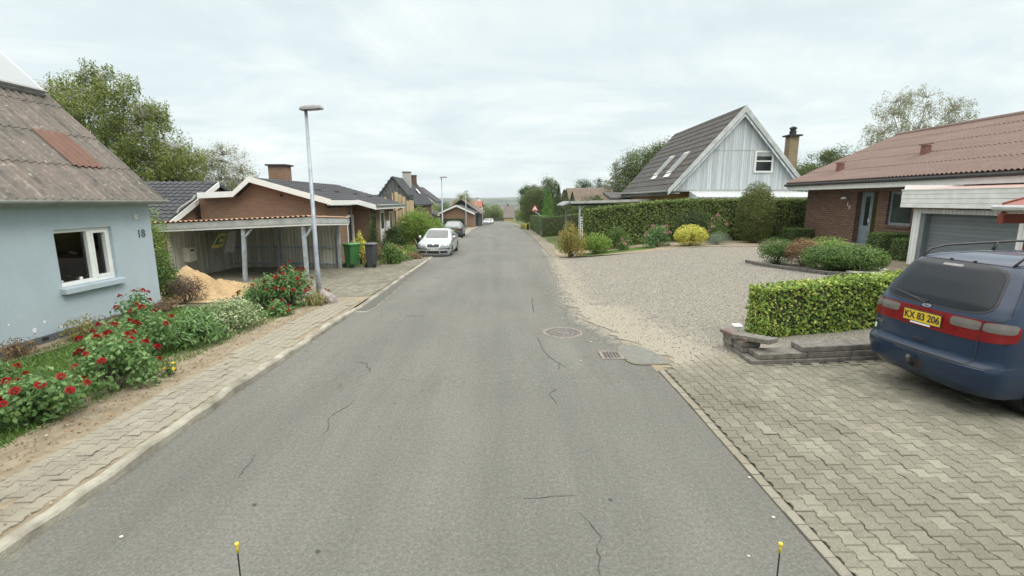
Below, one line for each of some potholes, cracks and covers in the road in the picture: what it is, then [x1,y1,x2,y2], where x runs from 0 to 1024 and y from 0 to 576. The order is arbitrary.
crack [515,495,602,575]
manhole cover [542,327,583,338]
drain grate [598,351,625,359]
